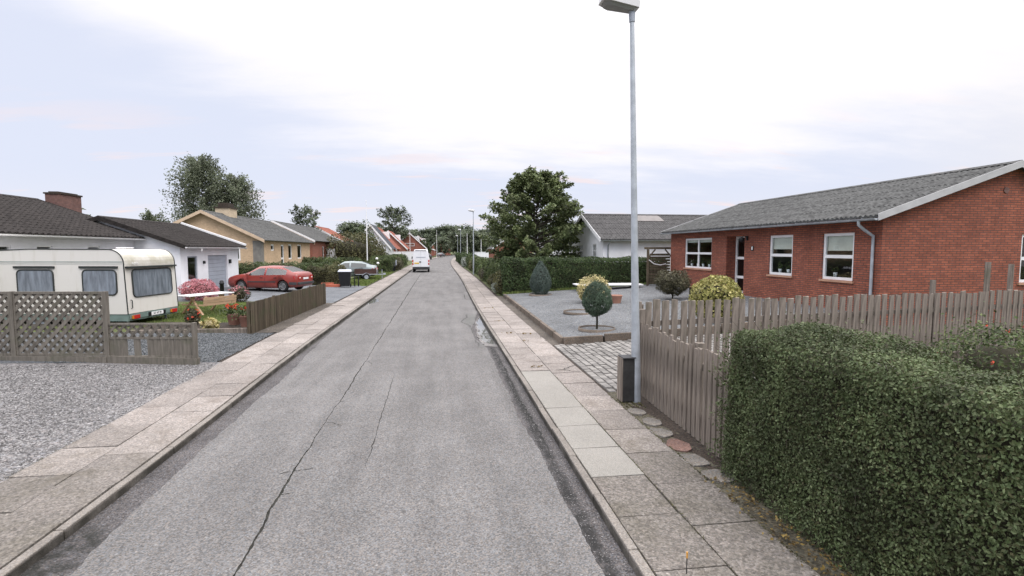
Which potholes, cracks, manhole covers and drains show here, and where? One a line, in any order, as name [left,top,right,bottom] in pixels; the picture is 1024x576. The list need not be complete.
crack [233,274,421,576]
